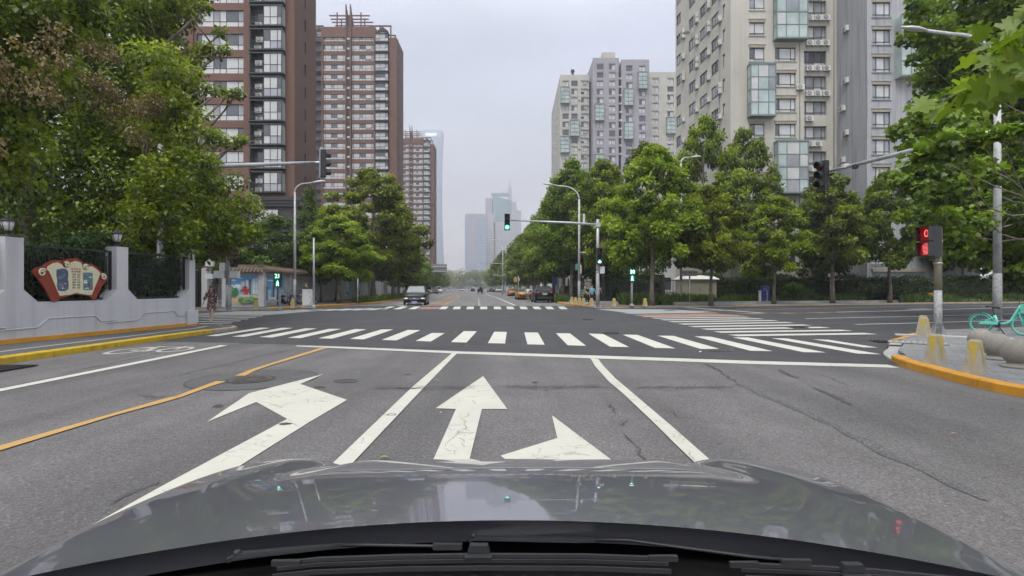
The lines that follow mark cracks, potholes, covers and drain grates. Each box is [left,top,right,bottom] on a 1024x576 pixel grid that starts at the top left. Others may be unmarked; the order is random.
manhole cover [225,375,276,383]
